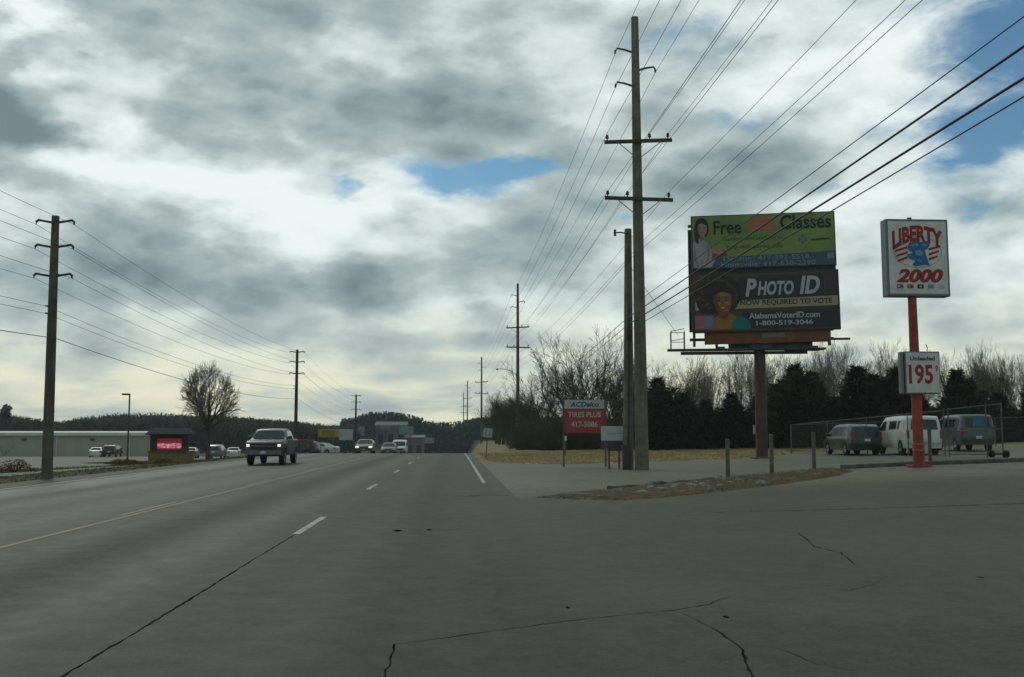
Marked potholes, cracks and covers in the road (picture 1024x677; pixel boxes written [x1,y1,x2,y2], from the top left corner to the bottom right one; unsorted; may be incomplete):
crack [383,596,754,677]
crack [797,532,856,566]
